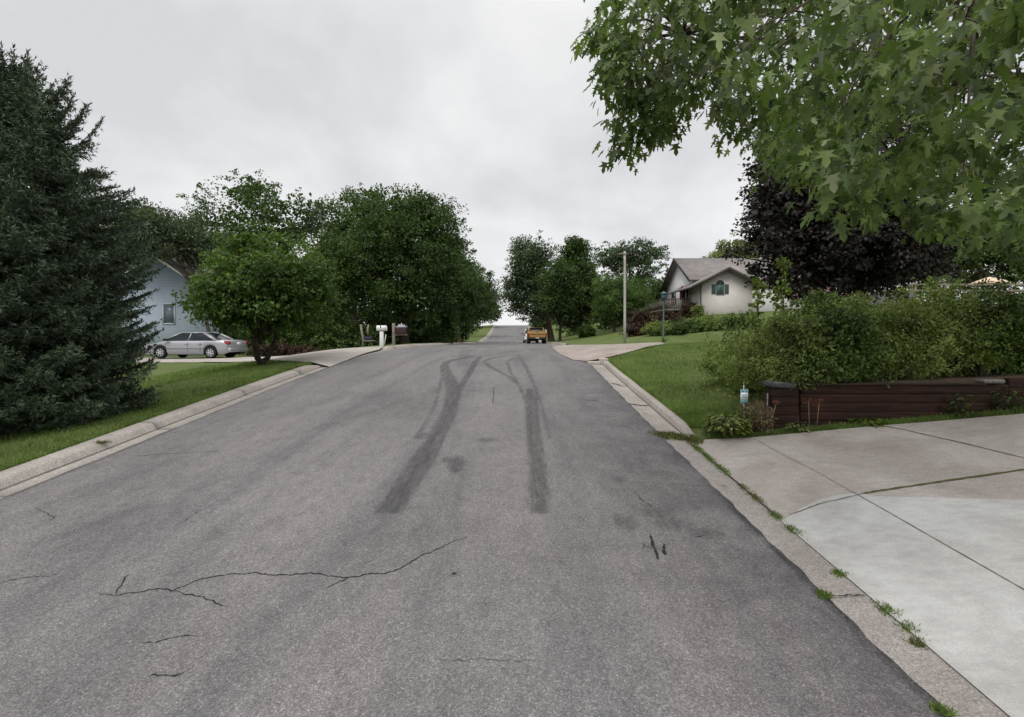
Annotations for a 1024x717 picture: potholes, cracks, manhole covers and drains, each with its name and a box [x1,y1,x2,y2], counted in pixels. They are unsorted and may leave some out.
crack [106,538,464,607]
